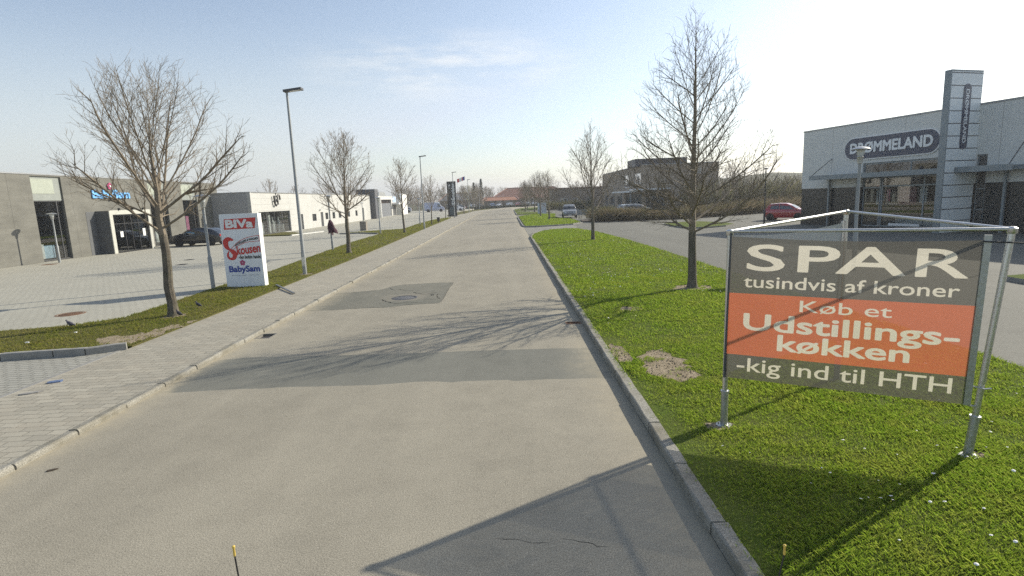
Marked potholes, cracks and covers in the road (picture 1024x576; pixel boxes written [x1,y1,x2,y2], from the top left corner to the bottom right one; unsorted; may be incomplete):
crack [498,538,610,547]
